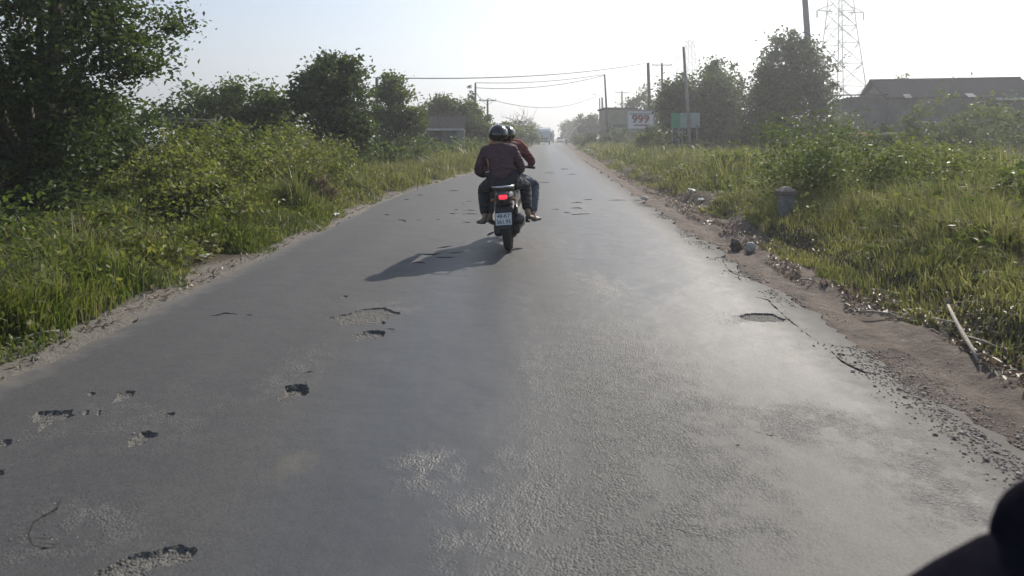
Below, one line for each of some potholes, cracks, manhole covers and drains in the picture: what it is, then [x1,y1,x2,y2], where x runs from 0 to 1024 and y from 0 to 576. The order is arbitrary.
crack [27,496,62,550]
pothole [128,430,159,447]
crack [757,297,880,375]
pothole [32,409,75,432]
pothole [93,544,198,576]
pothole [739,313,786,322]
pothole [328,307,400,326]
pothole [112,390,136,403]
pothole [356,330,386,341]
pothole [278,384,309,402]
